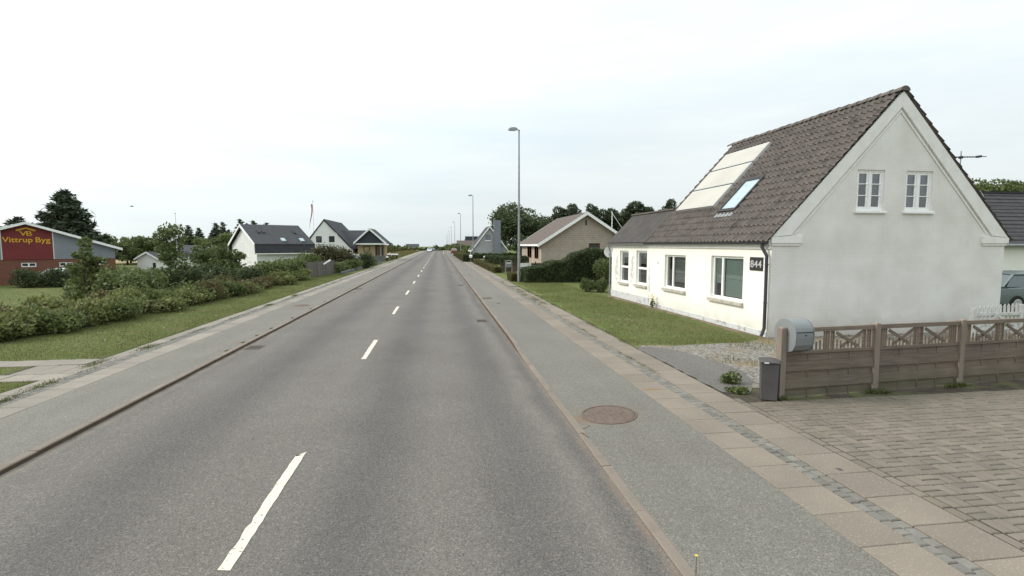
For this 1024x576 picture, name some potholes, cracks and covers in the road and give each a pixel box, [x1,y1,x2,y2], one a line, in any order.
manhole cover [581,405,638,424]
